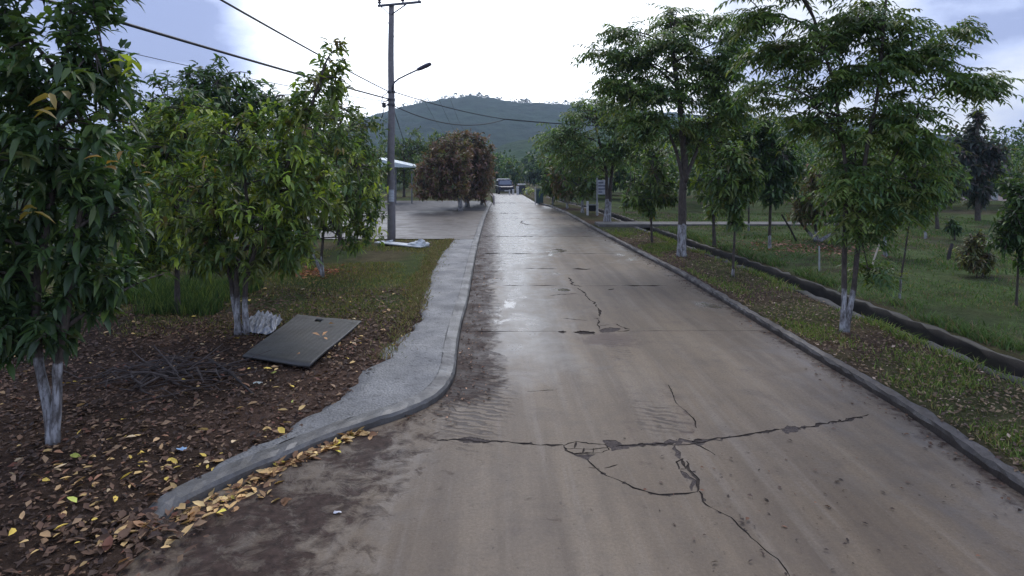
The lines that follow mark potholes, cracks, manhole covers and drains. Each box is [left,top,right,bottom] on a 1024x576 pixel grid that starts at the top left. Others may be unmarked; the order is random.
crack [437,385,869,576]
crack [550,278,629,334]
